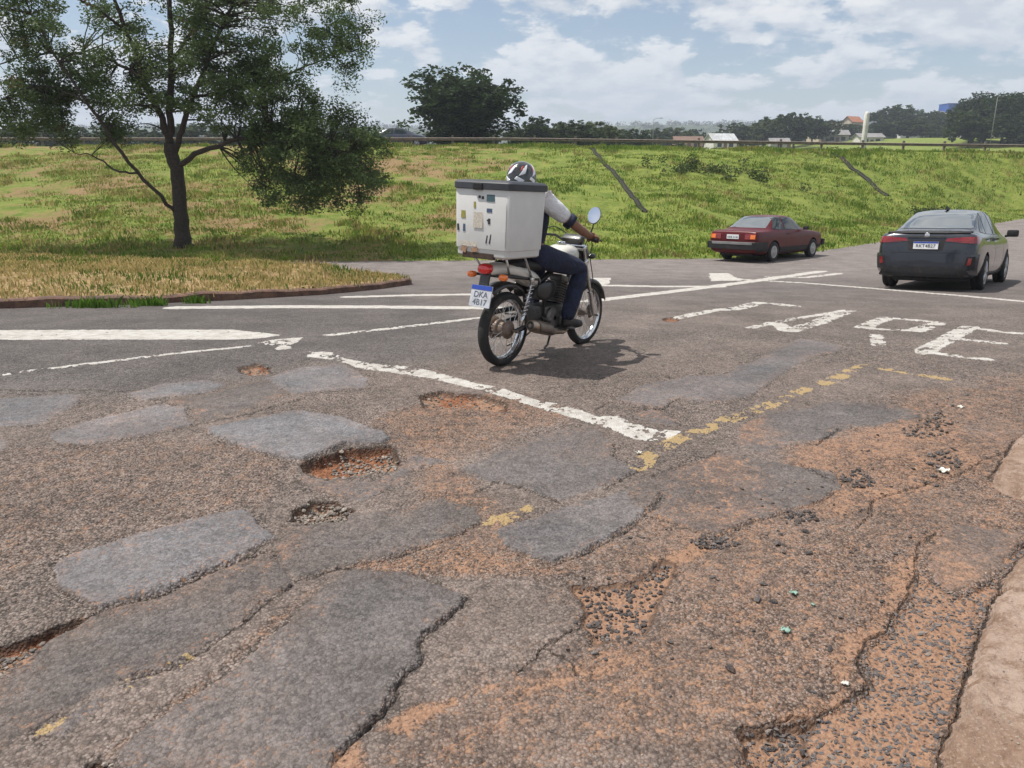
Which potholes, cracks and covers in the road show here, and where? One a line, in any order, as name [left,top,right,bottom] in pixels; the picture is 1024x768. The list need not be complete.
pothole [417,390,511,413]
pothole [297,444,405,481]
crack [93,523,482,763]
pothole [565,556,682,648]
crack [516,443,721,567]
crack [692,428,1024,768]
crack [472,481,562,504]
pothole [235,363,274,377]
crack [516,626,581,676]
pothole [287,498,358,526]
